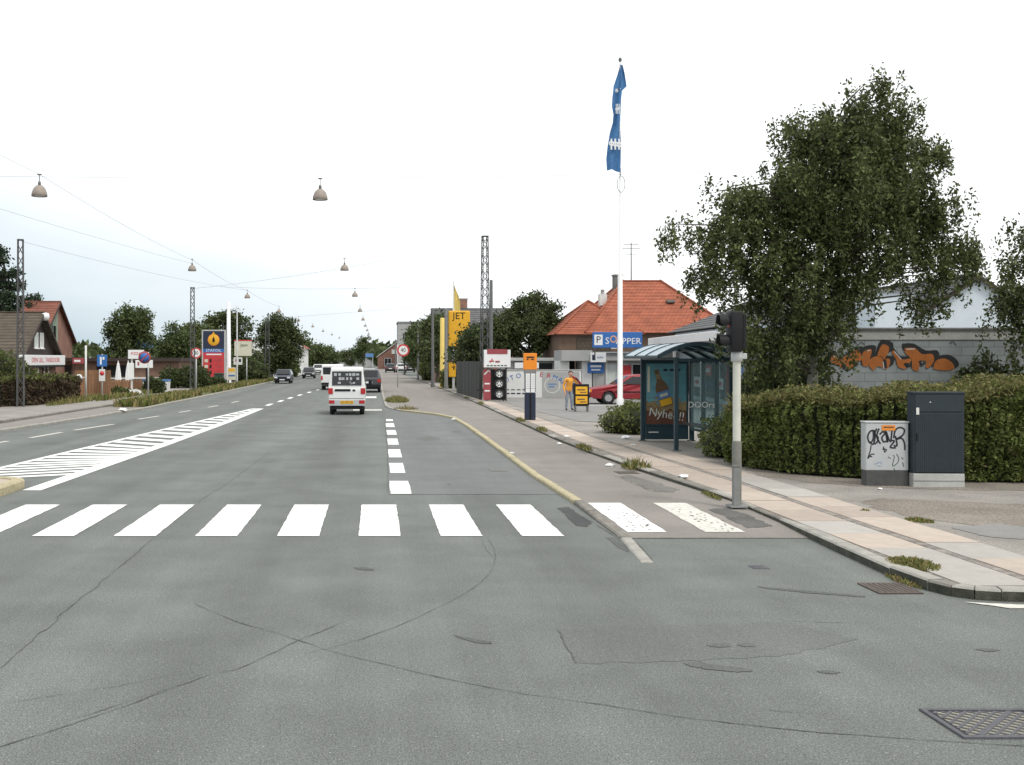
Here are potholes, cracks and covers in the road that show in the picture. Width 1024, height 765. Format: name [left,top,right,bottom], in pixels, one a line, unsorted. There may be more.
crack [0,537,155,668]
crack [304,540,496,654]
crack [1,603,1024,746]
drain grate [857,583,924,594]
